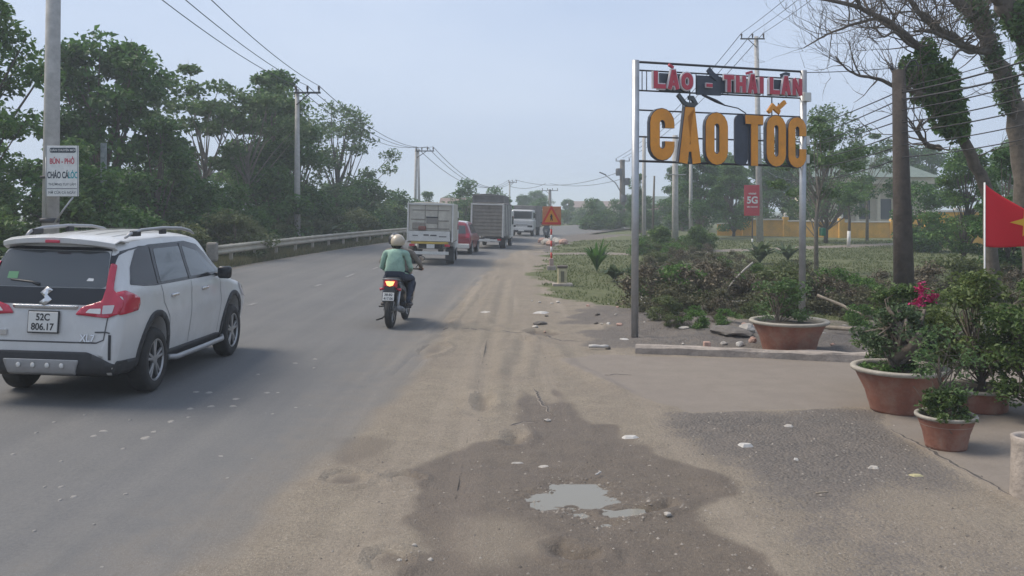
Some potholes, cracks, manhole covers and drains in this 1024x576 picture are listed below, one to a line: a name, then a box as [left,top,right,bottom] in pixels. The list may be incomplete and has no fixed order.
crack [511,389,552,425]
pothole [468,390,501,413]
pothole [316,466,372,486]
pothole [489,472,686,538]
